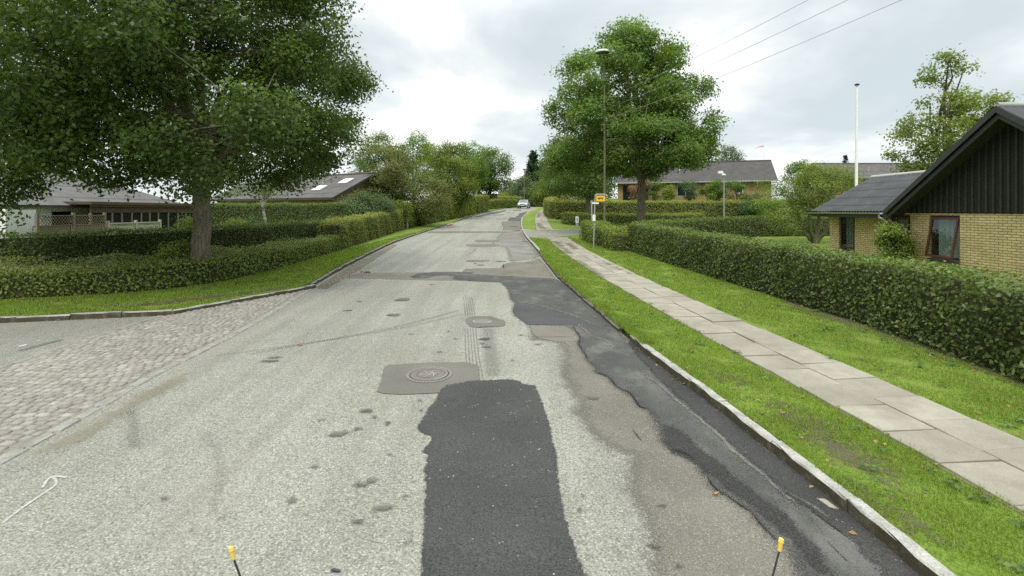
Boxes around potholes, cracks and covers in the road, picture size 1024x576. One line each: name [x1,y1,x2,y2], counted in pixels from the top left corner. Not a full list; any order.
manhole cover [406,367,453,383]
